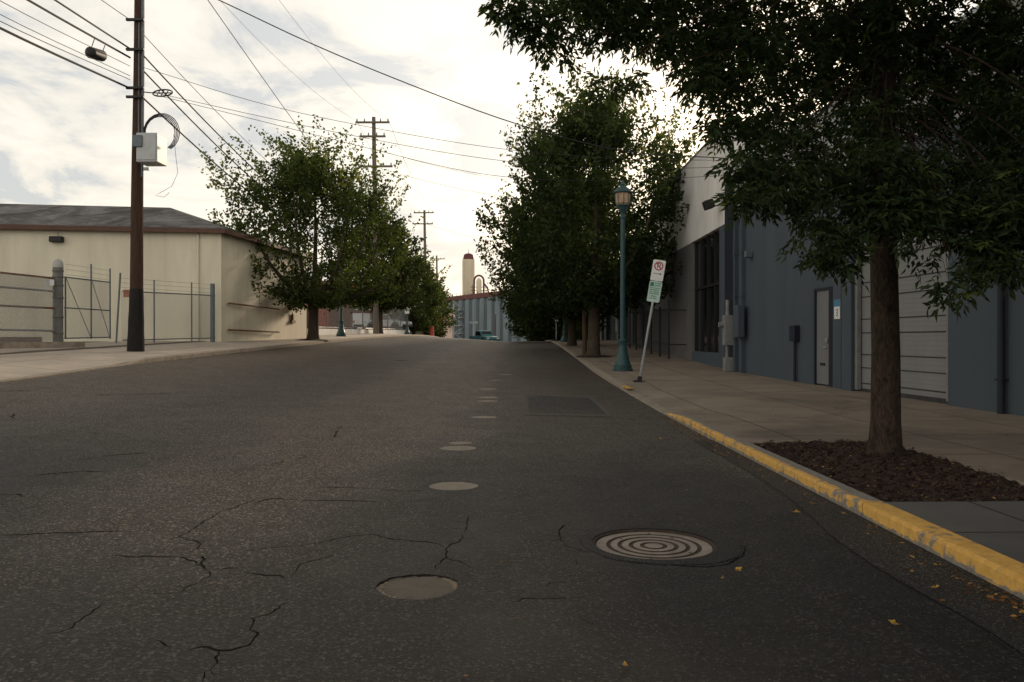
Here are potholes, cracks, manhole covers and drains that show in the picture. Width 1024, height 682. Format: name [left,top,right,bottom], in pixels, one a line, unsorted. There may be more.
crack [514,522,746,602]
crack [34,433,152,476]
crack [119,486,478,594]
manhole cover [579,526,741,566]
crack [157,602,287,682]
crack [48,598,113,634]
